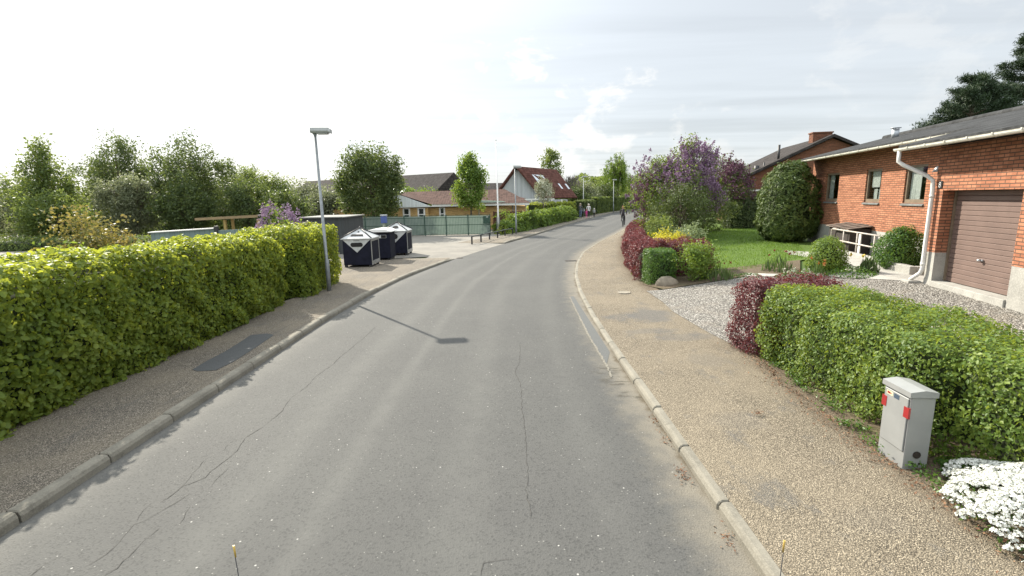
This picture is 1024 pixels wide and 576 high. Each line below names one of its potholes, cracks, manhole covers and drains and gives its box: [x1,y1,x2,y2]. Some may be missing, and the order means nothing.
crack [515,344,532,513]
crack [90,329,373,574]
